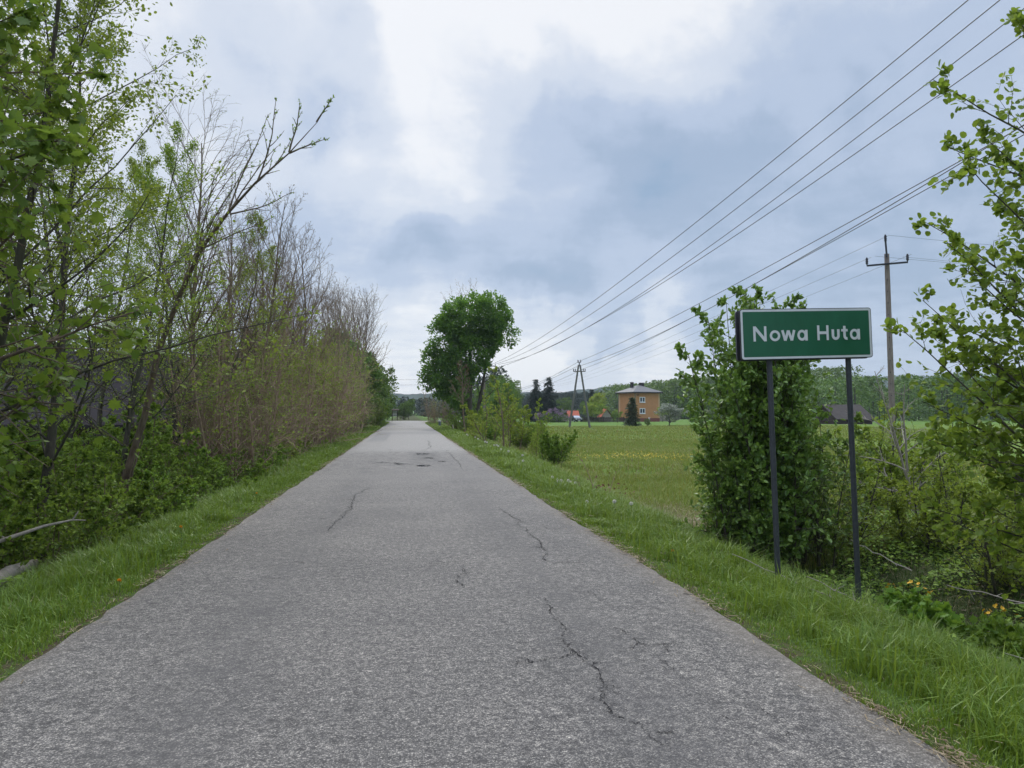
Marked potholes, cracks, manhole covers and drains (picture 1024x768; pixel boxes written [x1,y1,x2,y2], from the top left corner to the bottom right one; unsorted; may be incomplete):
crack [509,598,675,750]
crack [320,489,367,532]
crack [507,512,583,563]
